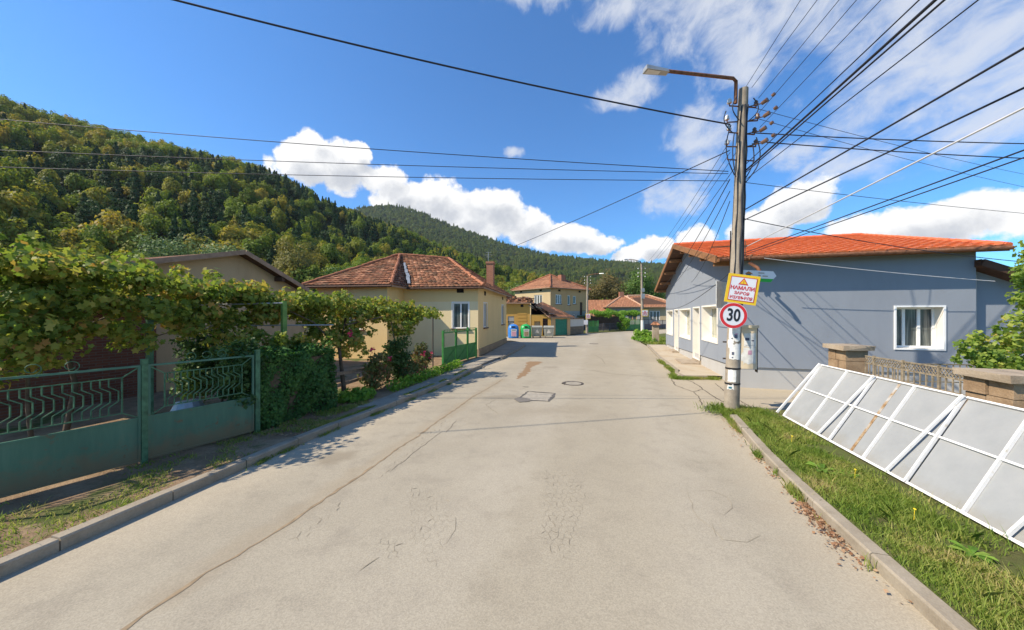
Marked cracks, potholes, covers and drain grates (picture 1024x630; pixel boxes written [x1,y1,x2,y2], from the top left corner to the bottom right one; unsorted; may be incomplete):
crack [687,490,758,542]
manhole cover [520,391,556,401]
